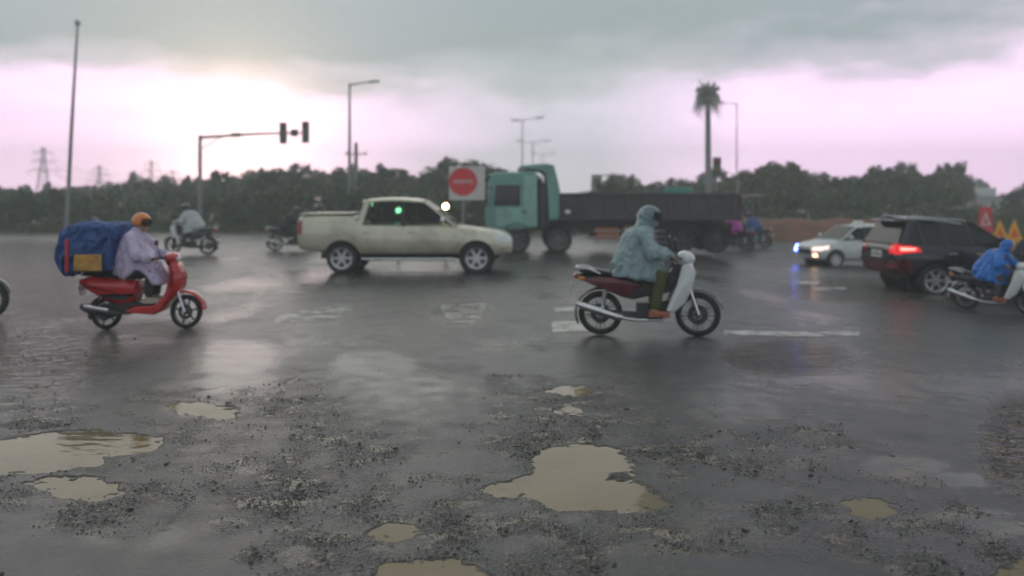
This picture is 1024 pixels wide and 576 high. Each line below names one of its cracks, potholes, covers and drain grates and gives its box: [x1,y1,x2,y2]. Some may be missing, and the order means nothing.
pothole [361,522,424,542]
pothole [166,401,242,421]
pothole [0,428,166,475]
pothole [21,474,129,503]
pothole [552,406,584,415]
pothole [371,555,497,576]
pothole [838,496,899,521]
pothole [990,554,1024,576]
pothole [533,385,595,397]
pothole [475,442,676,515]
